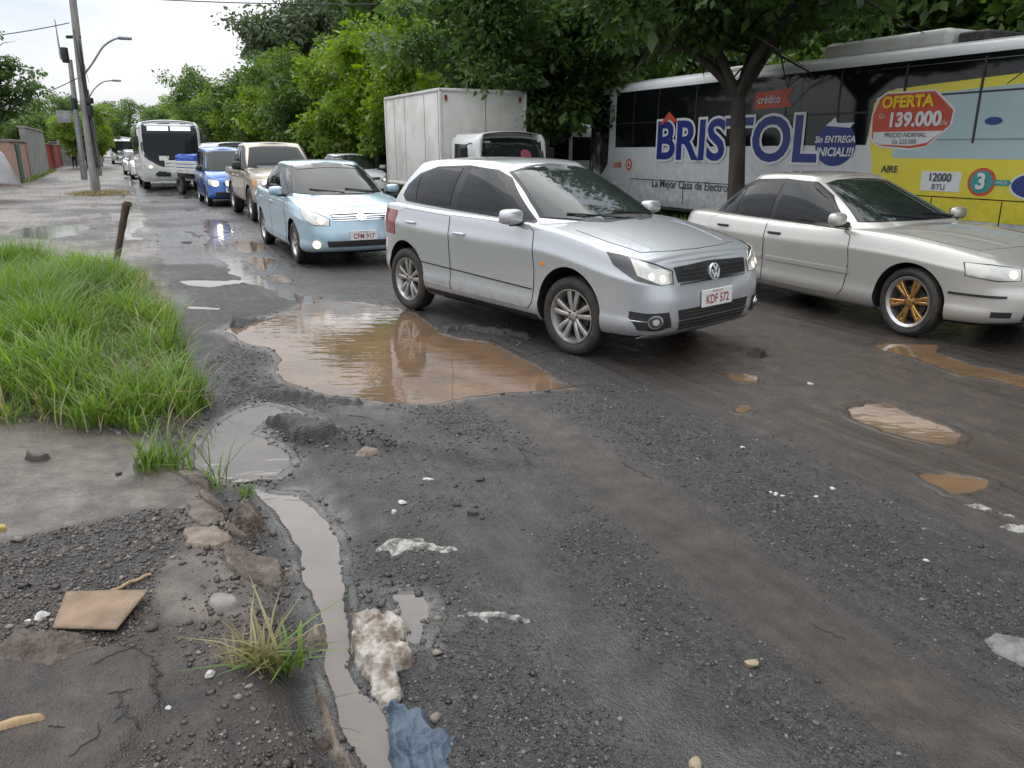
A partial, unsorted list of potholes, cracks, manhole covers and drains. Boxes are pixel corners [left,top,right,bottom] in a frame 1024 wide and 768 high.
pothole [868,341,1024,390]
pothole [182,401,329,485]
crack [622,462,653,480]
pothole [907,469,1002,498]
pothole [197,218,321,306]
pothole [171,279,248,288]
crack [49,648,163,757]
pothole [243,483,392,768]
pothole [727,404,759,415]
pothole [721,371,766,385]
pothole [837,400,973,448]
pothole [374,586,450,653]
